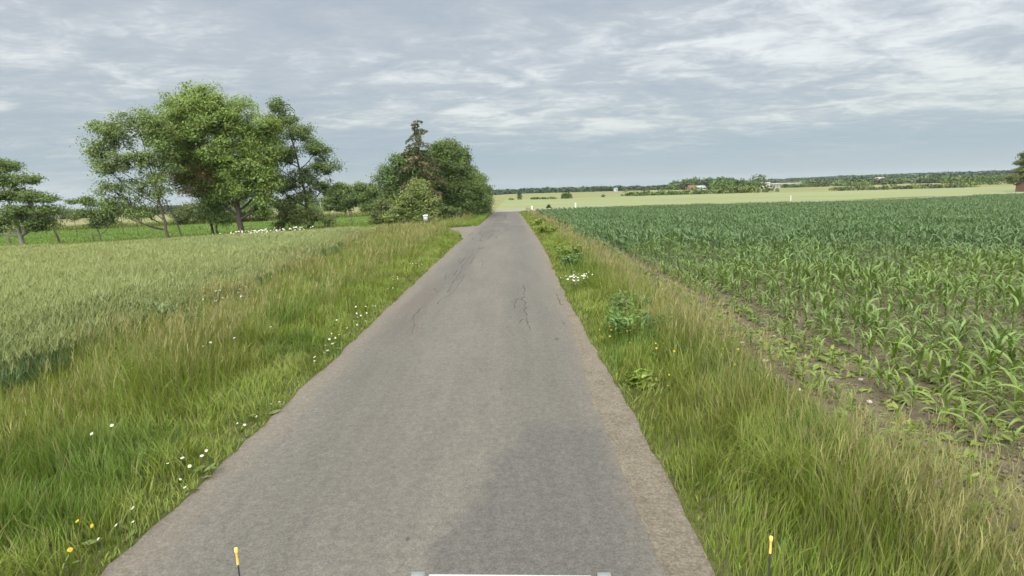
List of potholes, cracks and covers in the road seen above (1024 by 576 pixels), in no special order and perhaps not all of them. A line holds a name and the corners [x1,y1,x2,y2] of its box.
crack [514,285,530,329]
crack [412,213,524,333]
